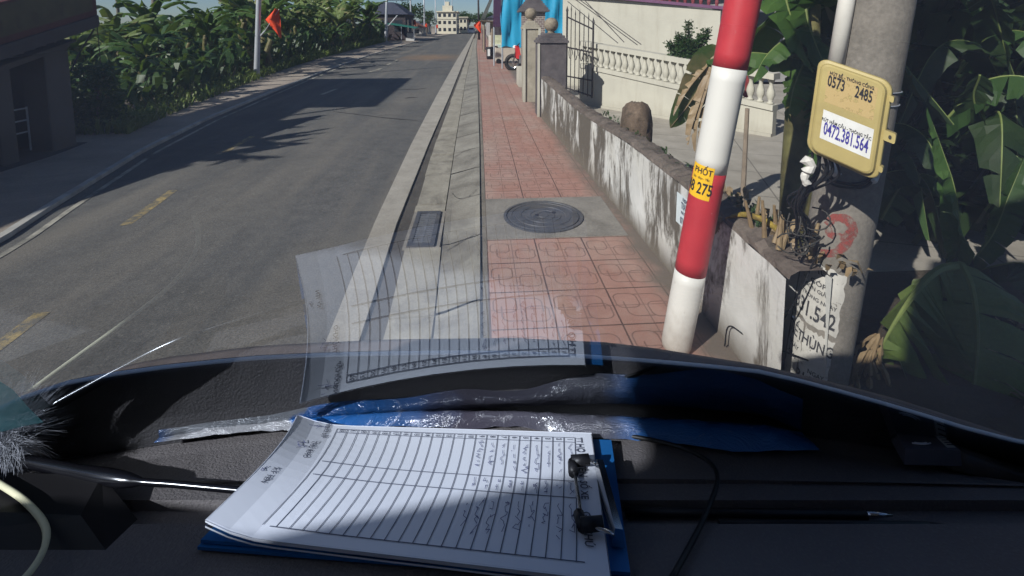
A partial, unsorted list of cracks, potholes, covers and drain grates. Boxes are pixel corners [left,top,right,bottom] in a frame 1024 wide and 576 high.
manhole cover [504,201,583,233]
drain grate [406,211,441,248]
